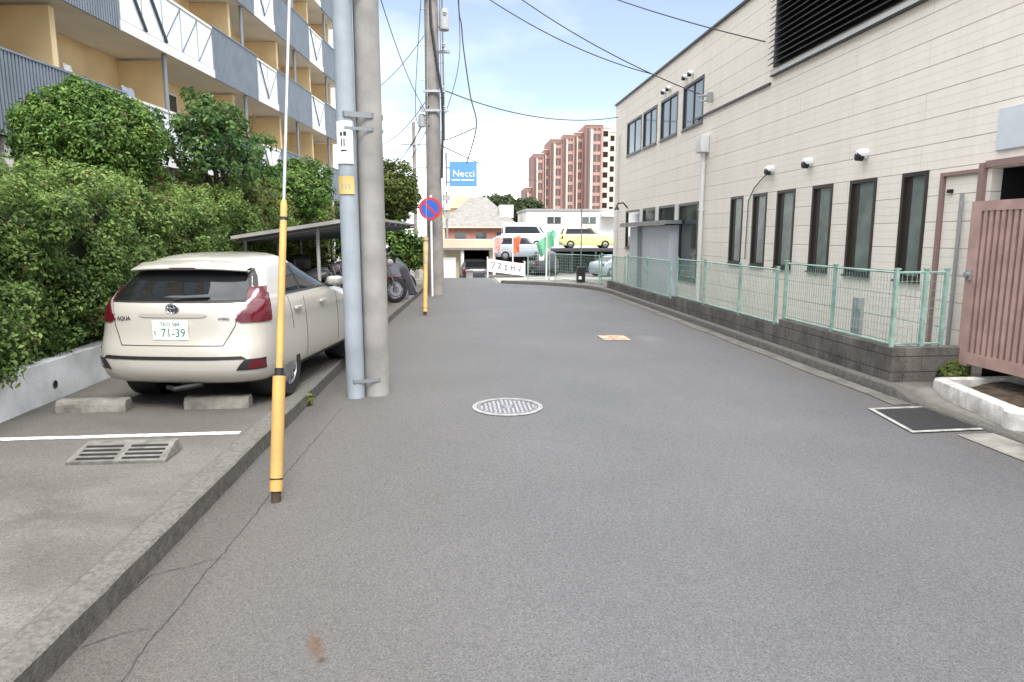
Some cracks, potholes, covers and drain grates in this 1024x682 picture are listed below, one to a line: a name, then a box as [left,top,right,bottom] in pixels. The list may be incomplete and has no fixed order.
crack [79,409,341,682]
drain grate [868,406,982,432]
manhole cover [472,398,543,416]
